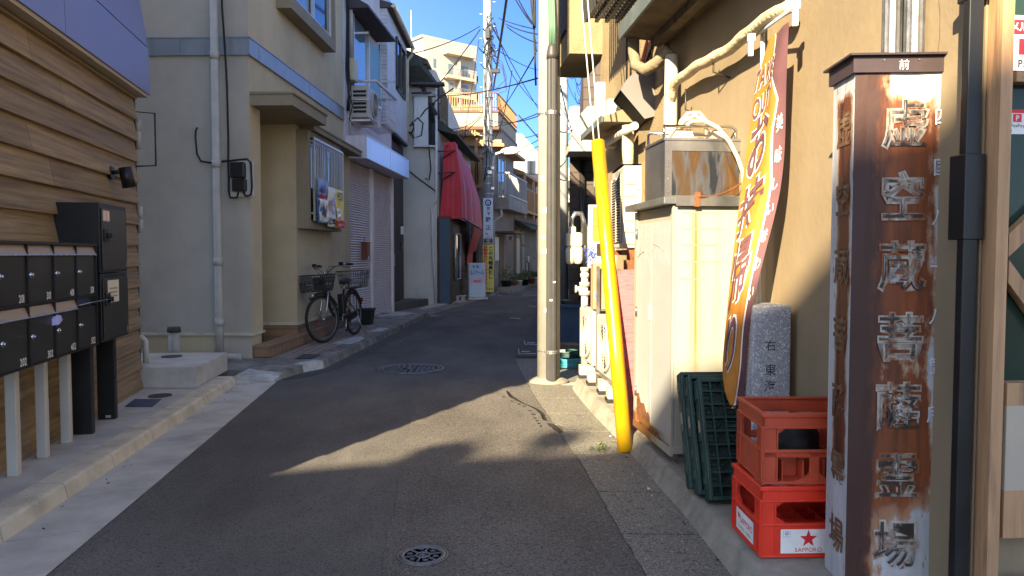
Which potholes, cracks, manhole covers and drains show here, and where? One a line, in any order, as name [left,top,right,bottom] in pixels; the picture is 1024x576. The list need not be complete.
manhole cover [376,363,444,374]
manhole cover [125,399,161,407]
manhole cover [397,545,448,566]
crack [502,390,548,427]
